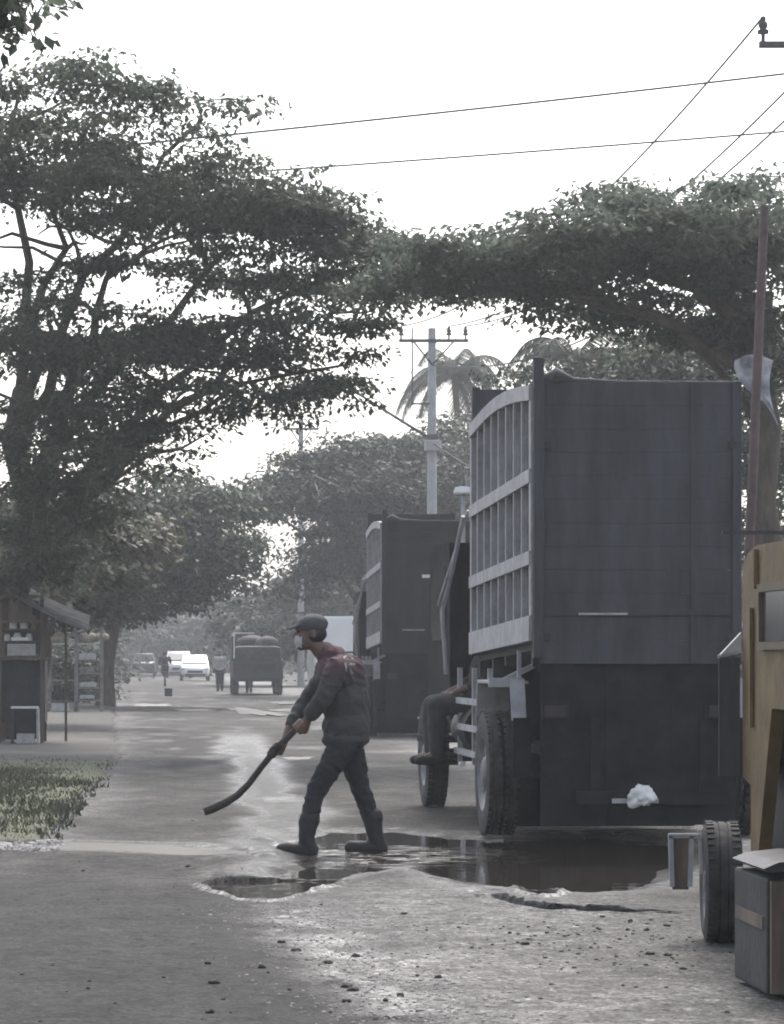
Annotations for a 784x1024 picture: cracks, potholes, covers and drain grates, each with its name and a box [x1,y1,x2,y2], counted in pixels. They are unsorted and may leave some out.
crack [478,892,669,915]
pothole [189,875,345,903]
